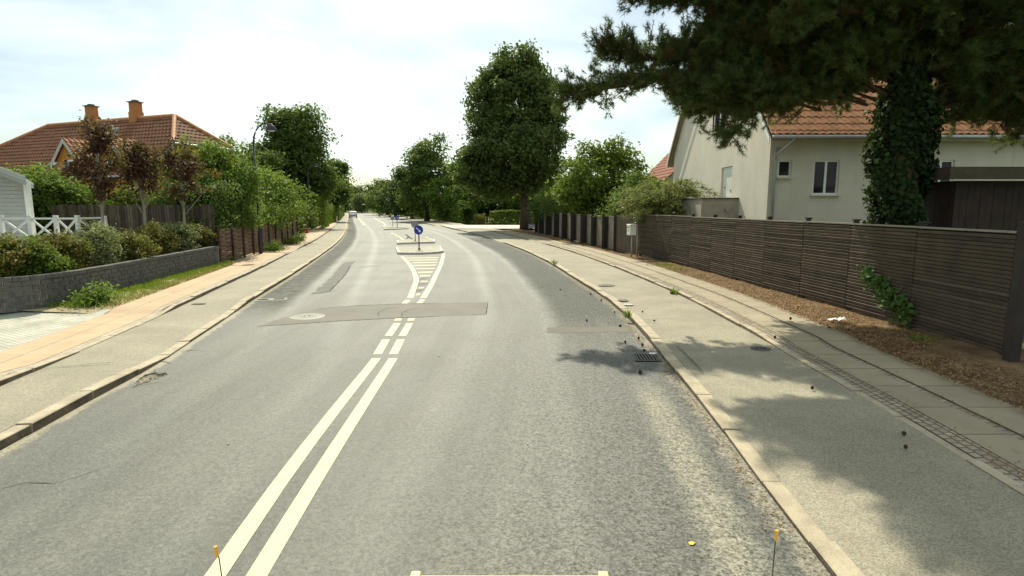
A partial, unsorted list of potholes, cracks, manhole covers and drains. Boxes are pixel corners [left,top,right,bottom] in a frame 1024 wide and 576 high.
drain grate [632,353,661,362]
pothole [134,372,168,387]
